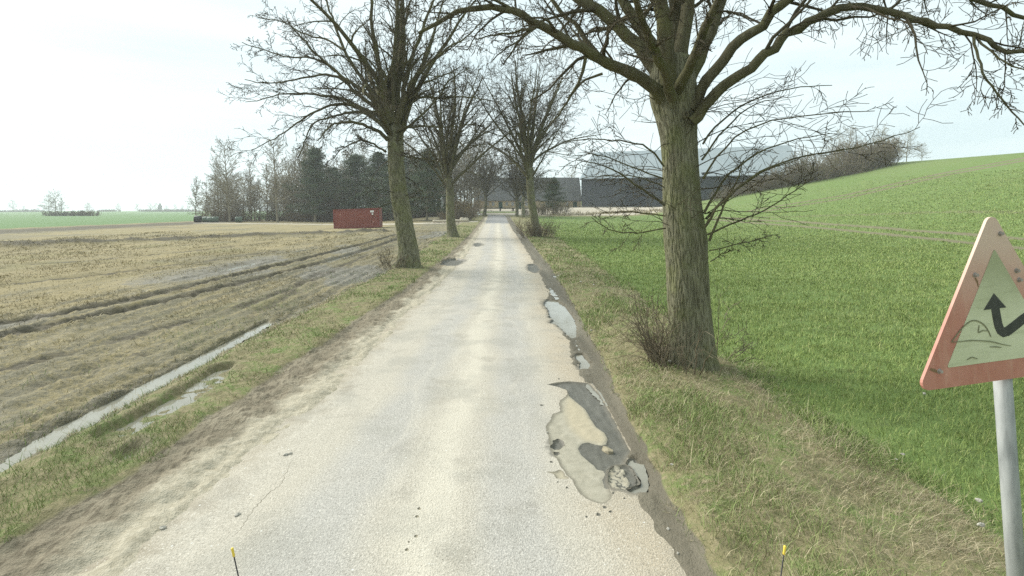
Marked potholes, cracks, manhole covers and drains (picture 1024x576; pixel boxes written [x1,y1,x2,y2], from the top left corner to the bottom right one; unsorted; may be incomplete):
pothole [626,459,650,492]
pothole [546,381,630,504]
pothole [441,258,465,266]
pothole [607,464,640,490]
